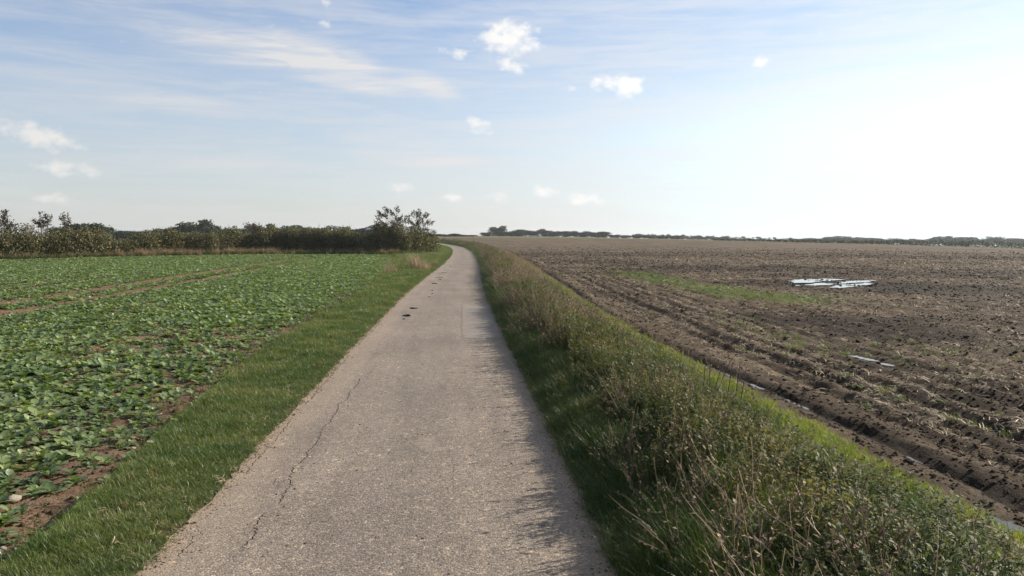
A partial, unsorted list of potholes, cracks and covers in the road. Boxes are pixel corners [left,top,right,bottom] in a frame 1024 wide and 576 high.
crack [245,322,380,504]
